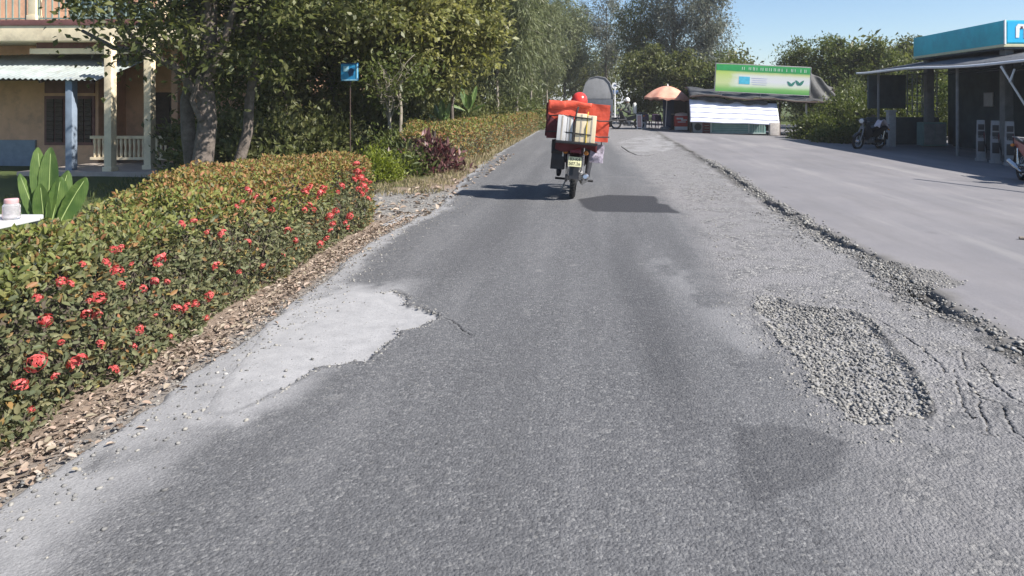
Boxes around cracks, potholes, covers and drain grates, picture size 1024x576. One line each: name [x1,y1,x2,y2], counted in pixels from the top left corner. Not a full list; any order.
pothole [748,294,944,430]
crack [441,317,475,336]
crack [687,160,1024,442]
